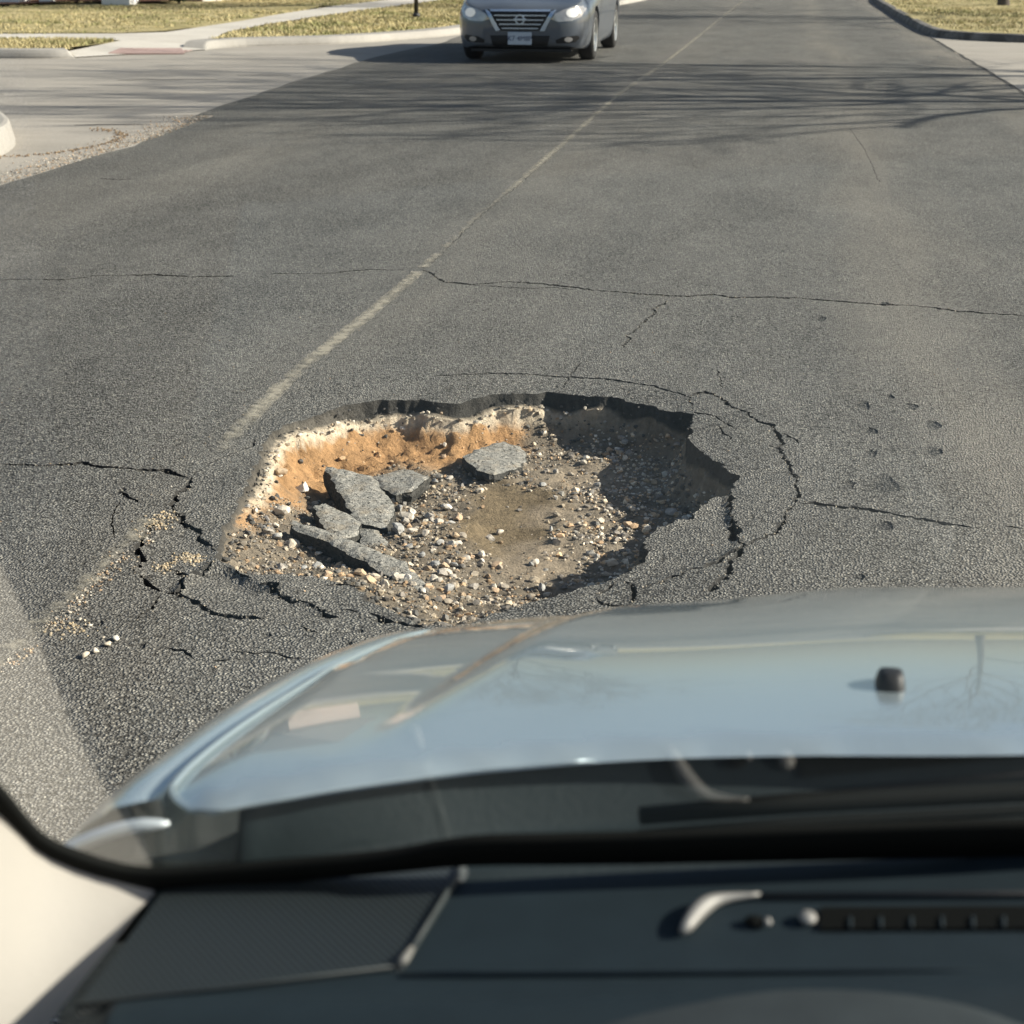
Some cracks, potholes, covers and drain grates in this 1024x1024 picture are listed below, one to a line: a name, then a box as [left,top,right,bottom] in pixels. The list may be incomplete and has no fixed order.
crack [423,270,1023,348]
crack [168,648,196,660]
crack [4,439,425,633]
crack [213,650,302,662]
pothole [214,392,740,626]
crack [438,363,969,592]
